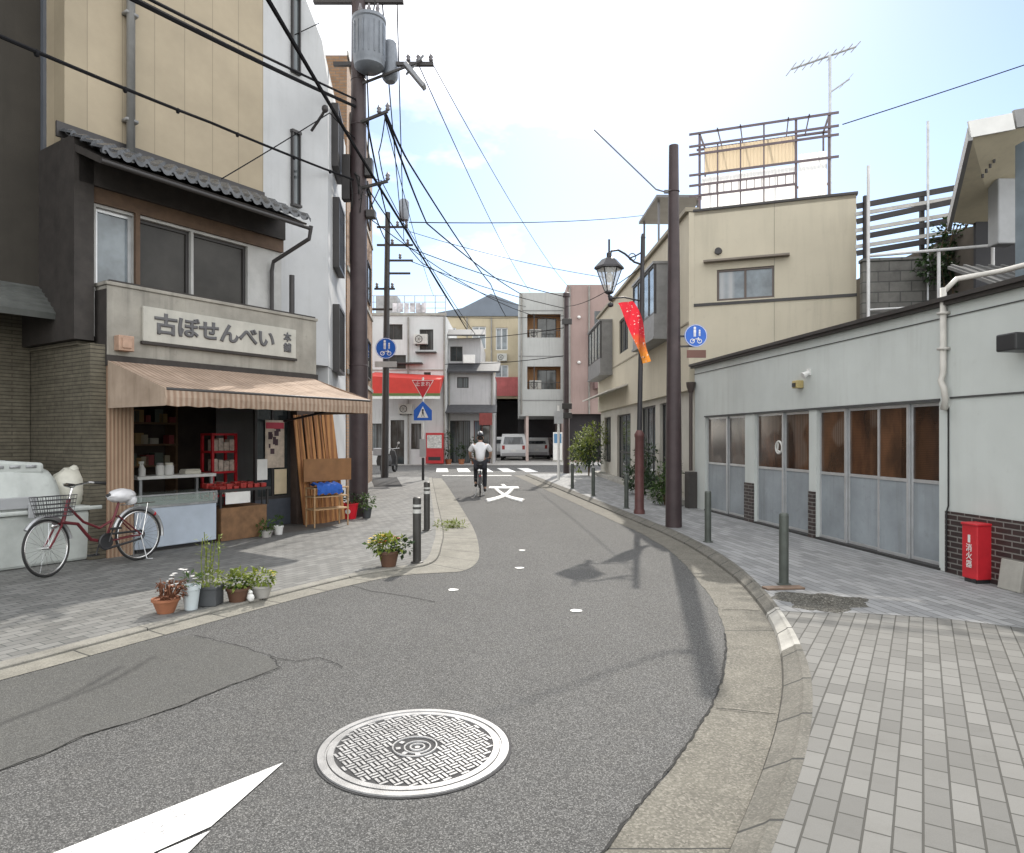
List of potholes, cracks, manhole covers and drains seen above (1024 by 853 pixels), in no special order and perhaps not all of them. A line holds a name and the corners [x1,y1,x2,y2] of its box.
manhole cover [314,709,512,799]
crack [195,635,341,667]
